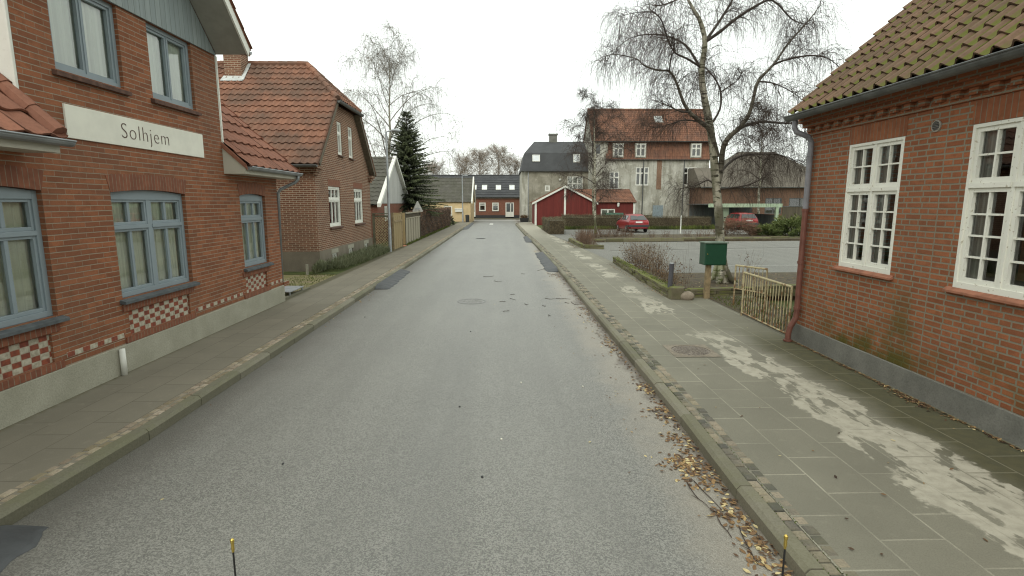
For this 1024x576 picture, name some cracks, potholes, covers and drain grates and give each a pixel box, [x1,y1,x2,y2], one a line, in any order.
manhole cover [663,345,722,357]
